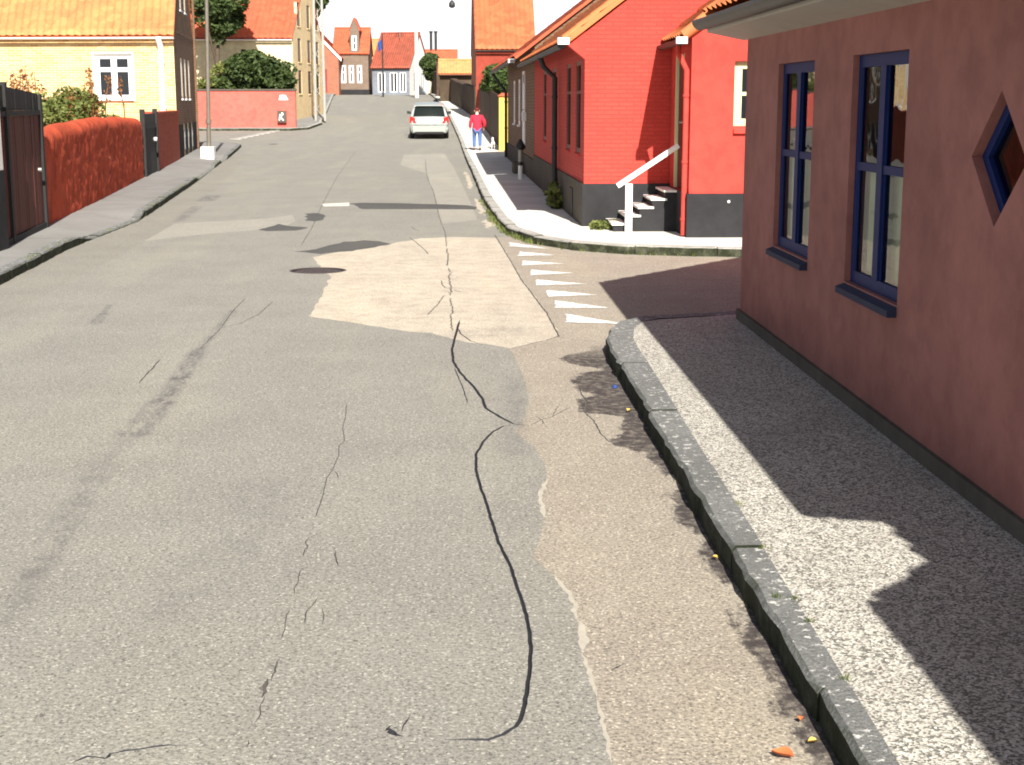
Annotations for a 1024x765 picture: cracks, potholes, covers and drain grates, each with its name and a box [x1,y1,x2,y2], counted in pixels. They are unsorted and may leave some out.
crack [410,159,623,741]
crack [72,744,179,763]
crack [246,404,347,746]
crack [201,299,273,348]
